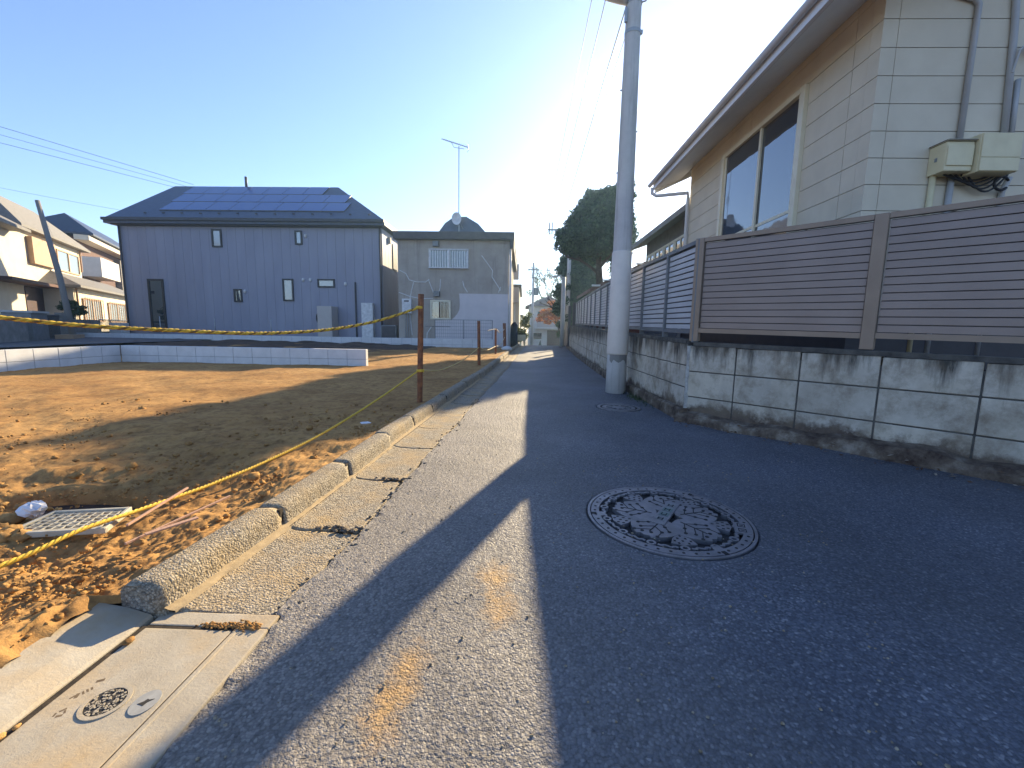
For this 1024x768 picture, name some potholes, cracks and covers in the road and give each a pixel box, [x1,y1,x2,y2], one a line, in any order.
drain grate [23,507,132,538]
manhole cover [587,487,758,561]
manhole cover [597,403,640,412]
